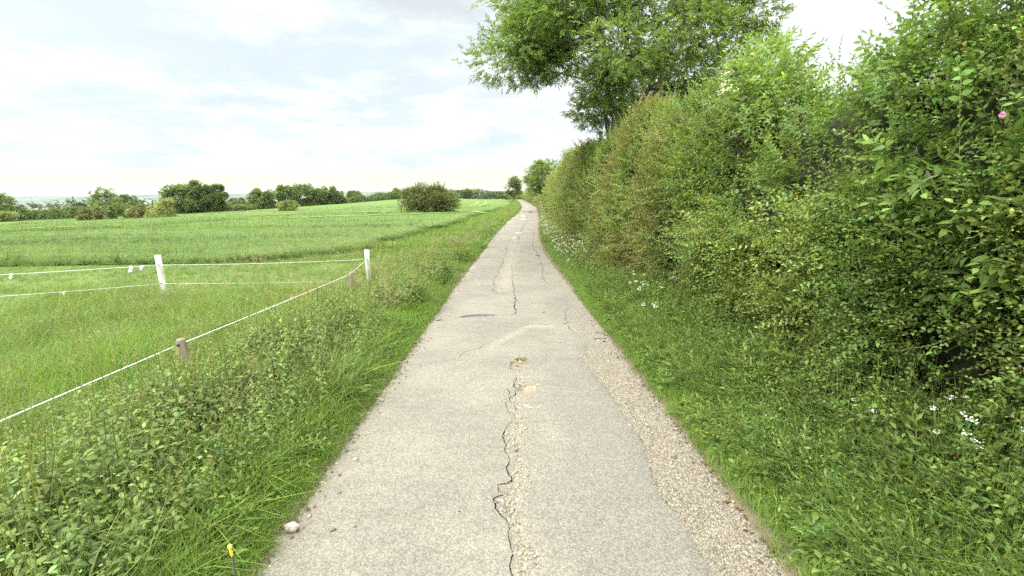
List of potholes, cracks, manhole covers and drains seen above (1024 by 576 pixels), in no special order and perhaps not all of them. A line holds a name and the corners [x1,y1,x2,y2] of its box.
crack [493,220,580,576]
